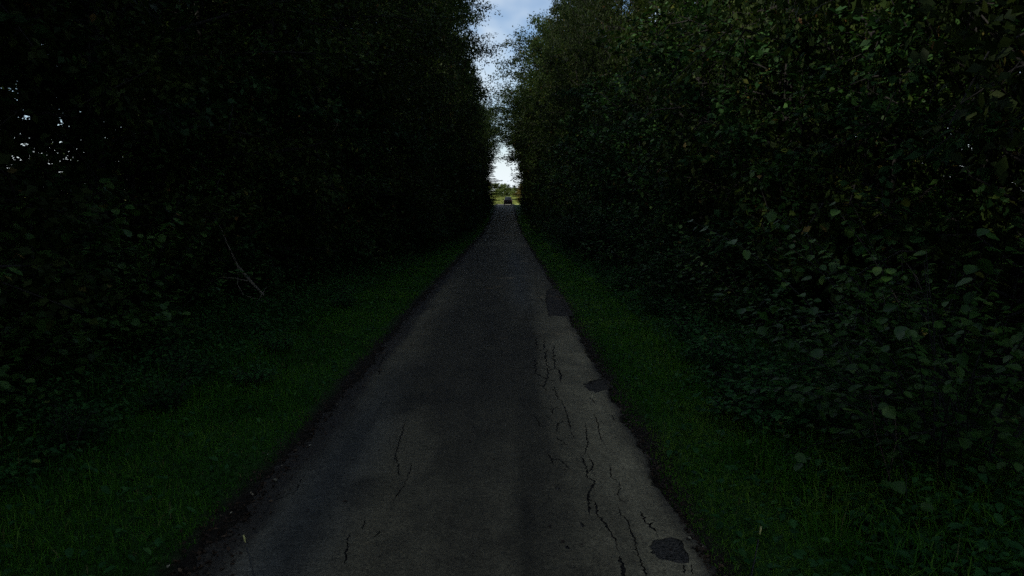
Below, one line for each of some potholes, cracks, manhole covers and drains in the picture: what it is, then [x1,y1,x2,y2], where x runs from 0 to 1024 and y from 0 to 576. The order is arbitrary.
crack [525,337,658,576]
crack [393,420,413,501]
crack [344,520,380,564]
